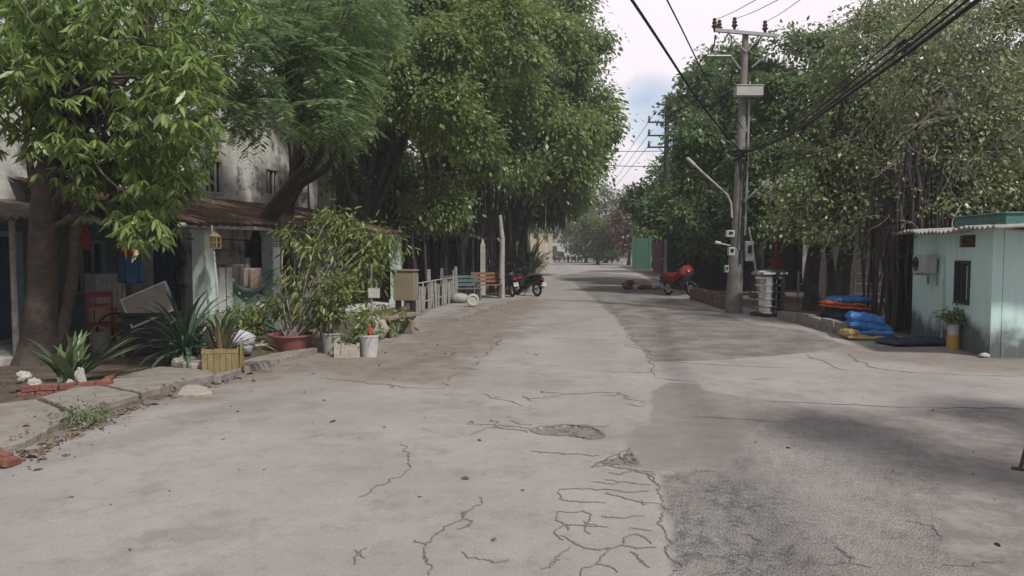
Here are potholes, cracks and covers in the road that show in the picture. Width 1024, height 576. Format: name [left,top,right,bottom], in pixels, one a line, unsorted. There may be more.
crack [359,444,412,497]
crack [353,547,367,564]
pothole [530,424,606,439]
crack [806,353,918,373]
crack [531,450,684,576]
crack [465,391,644,434]
crack [906,520,943,540]
crack [414,497,509,574]
crack [318,331,513,389]
